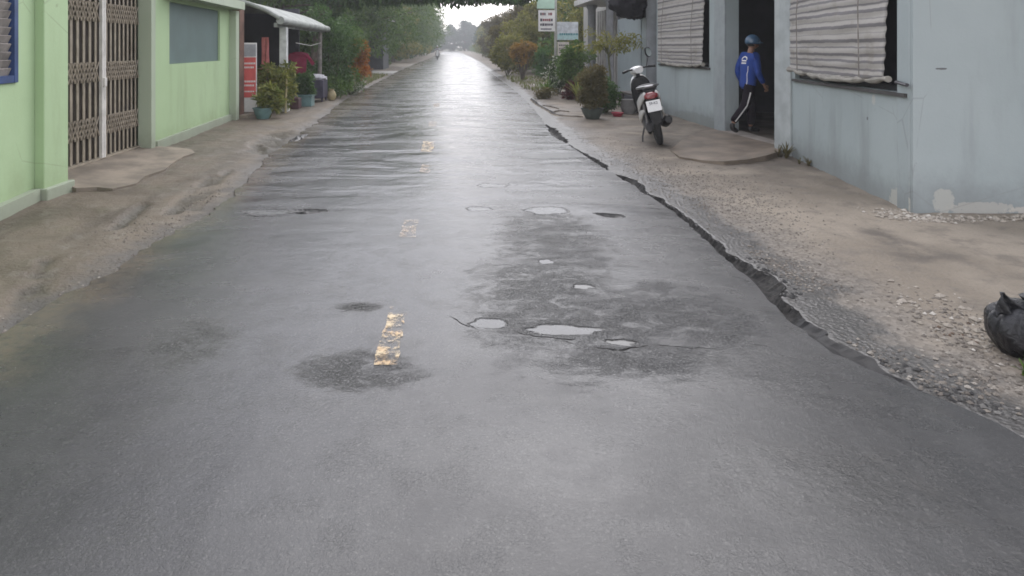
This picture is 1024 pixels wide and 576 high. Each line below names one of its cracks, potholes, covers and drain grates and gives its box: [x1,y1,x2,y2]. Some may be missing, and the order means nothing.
pothole [522,206,570,215]
pothole [519,323,609,335]
pothole [467,318,509,329]
crack [516,98,941,399]
pothole [603,338,638,346]
